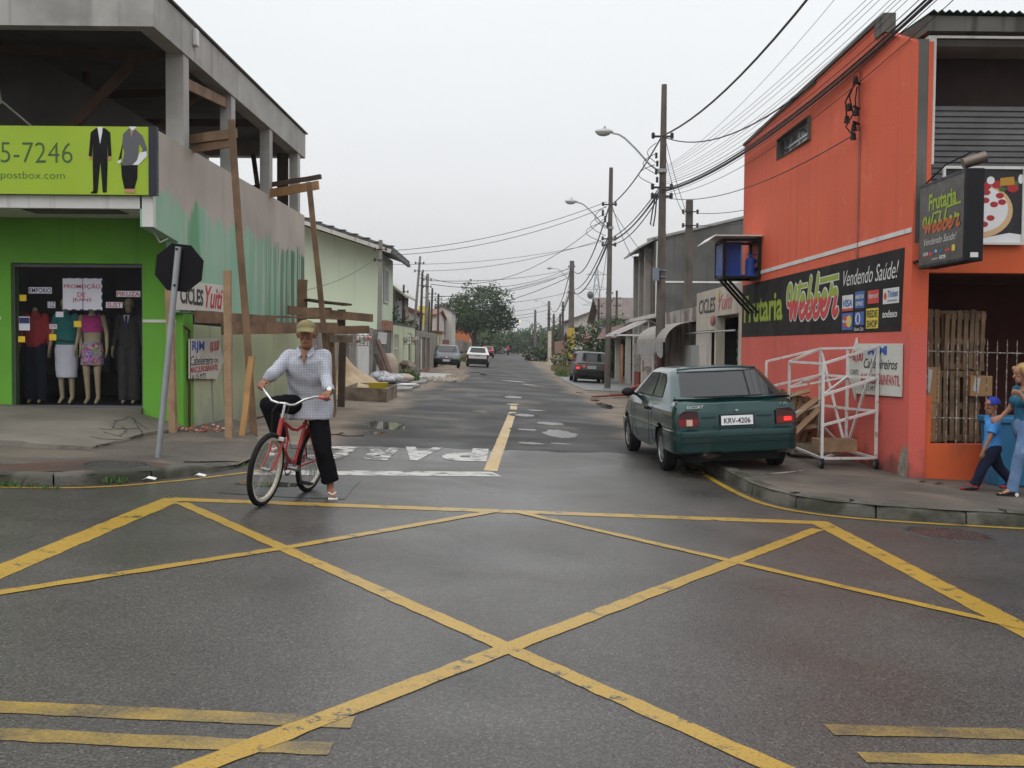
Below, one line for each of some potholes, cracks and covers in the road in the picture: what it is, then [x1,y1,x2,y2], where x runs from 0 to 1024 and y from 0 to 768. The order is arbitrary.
manhole cover [902,526,997,543]
manhole cover [79,461,152,469]
crack [95,416,146,447]
